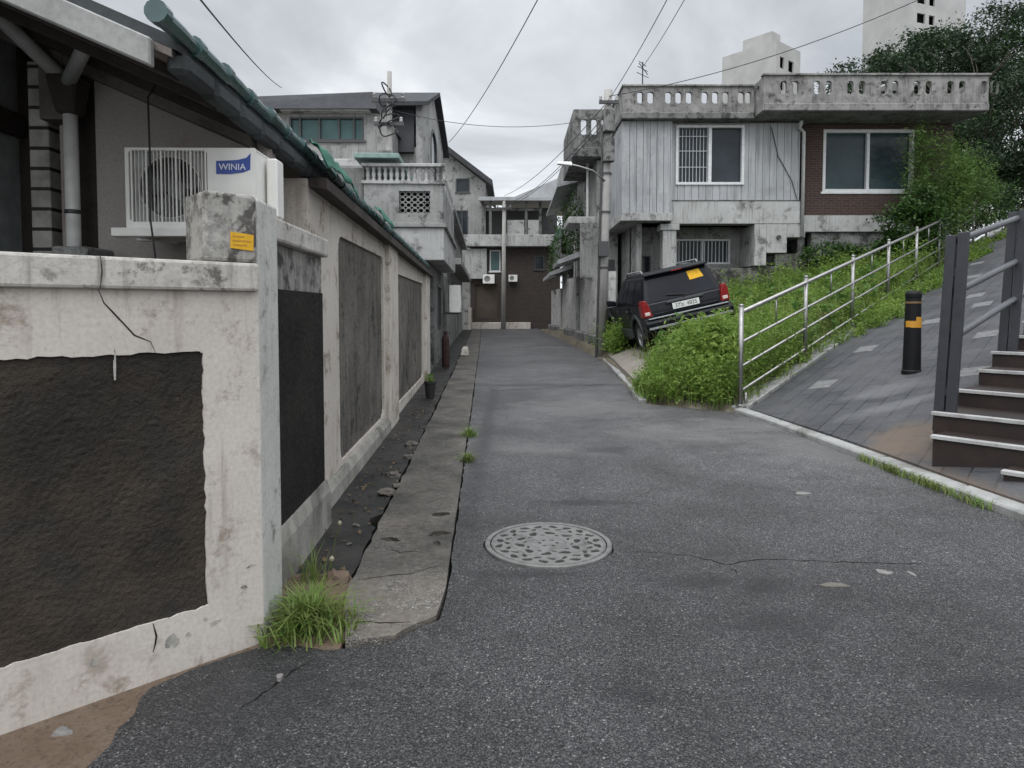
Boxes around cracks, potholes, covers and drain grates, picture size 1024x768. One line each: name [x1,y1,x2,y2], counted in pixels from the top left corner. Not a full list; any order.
crack [636,551,929,573]
manhole cover [483,522,614,569]
crack [360,550,441,580]
crack [239,661,311,710]
